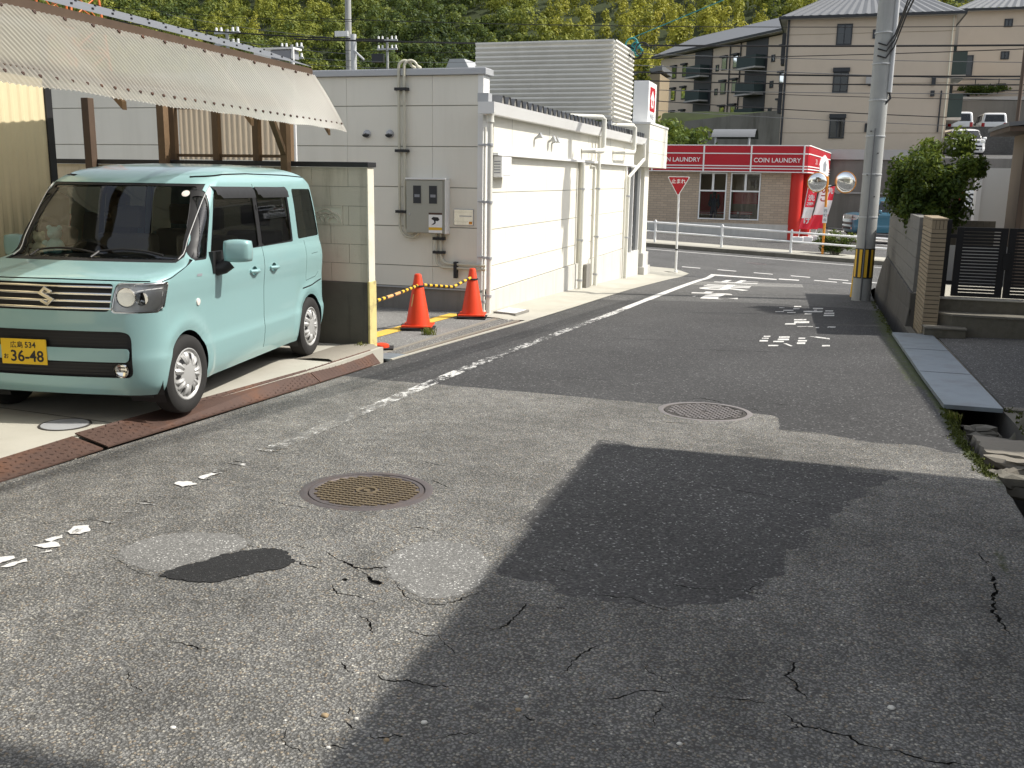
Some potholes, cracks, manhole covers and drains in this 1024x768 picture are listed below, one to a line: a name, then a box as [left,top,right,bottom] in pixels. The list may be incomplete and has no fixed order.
manhole cover [299,472,433,511]
crack [401,603,527,653]
crack [560,645,598,673]
crack [378,674,469,697]
manhole cover [38,418,92,431]
crack [281,696,481,754]
crack [248,545,482,634]
crack [706,657,975,766]
crack [602,652,693,726]
crack [978,553,1013,637]
manhole cover [658,402,753,422]
